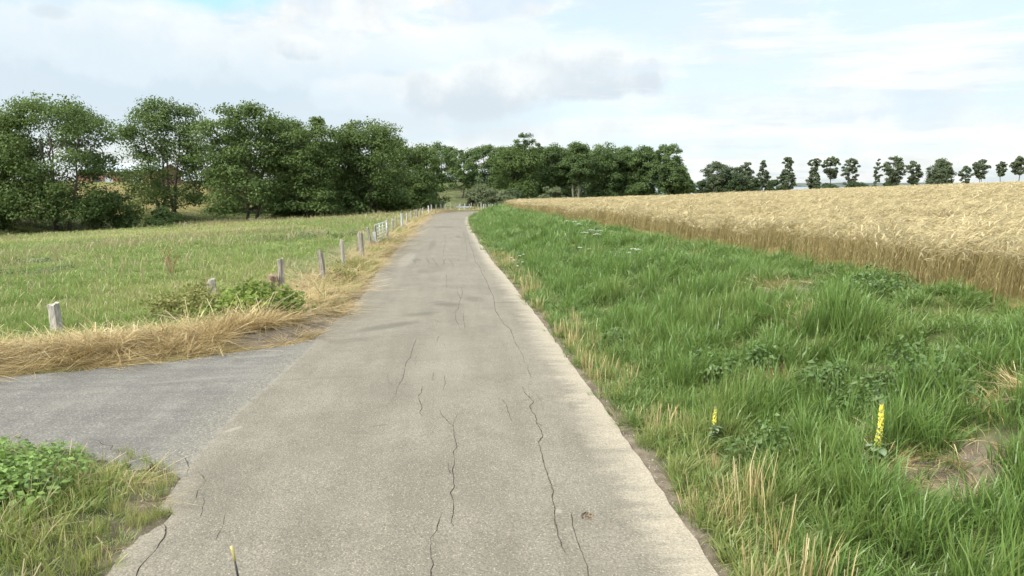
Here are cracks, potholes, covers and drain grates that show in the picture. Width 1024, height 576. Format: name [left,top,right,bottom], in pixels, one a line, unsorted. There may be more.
crack [466,230,589,576]
crack [136,524,167,576]
crack [388,338,457,576]
